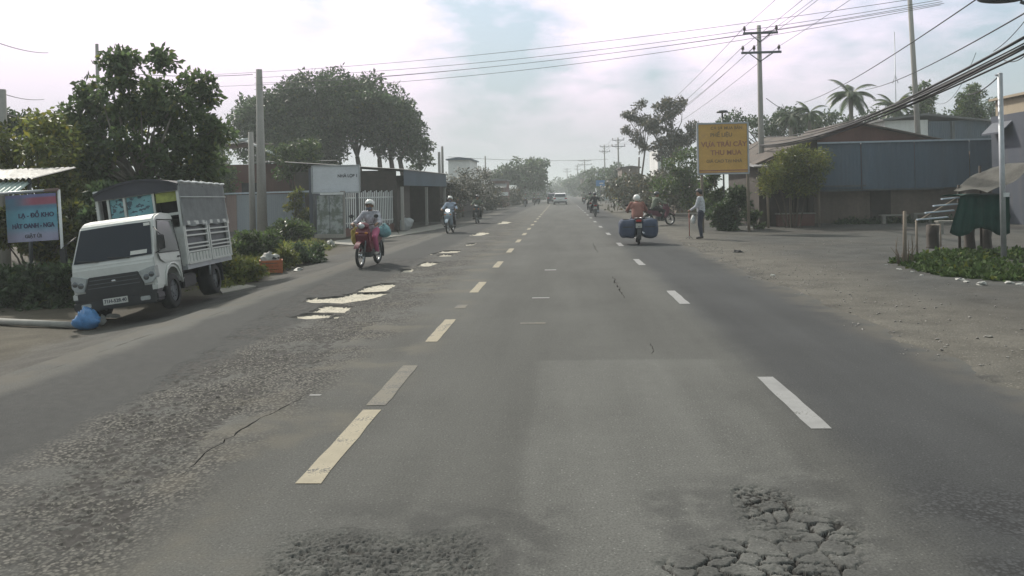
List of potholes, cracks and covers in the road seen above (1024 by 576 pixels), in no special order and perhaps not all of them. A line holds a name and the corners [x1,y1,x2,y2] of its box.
crack [649,483,877,576]
crack [0,258,506,576]
